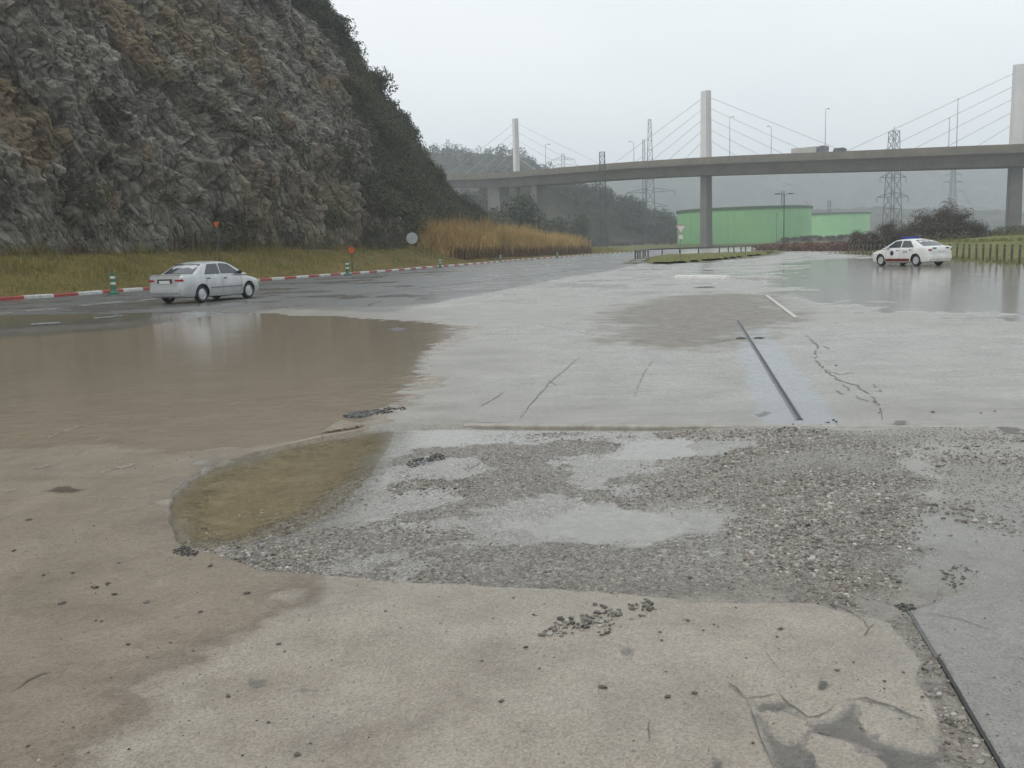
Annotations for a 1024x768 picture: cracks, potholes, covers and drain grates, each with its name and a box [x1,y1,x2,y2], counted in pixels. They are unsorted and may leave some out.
crack [521,359,652,417]
pothole [179,435,385,541]
crack [729,683,925,768]
crack [807,336,883,419]
